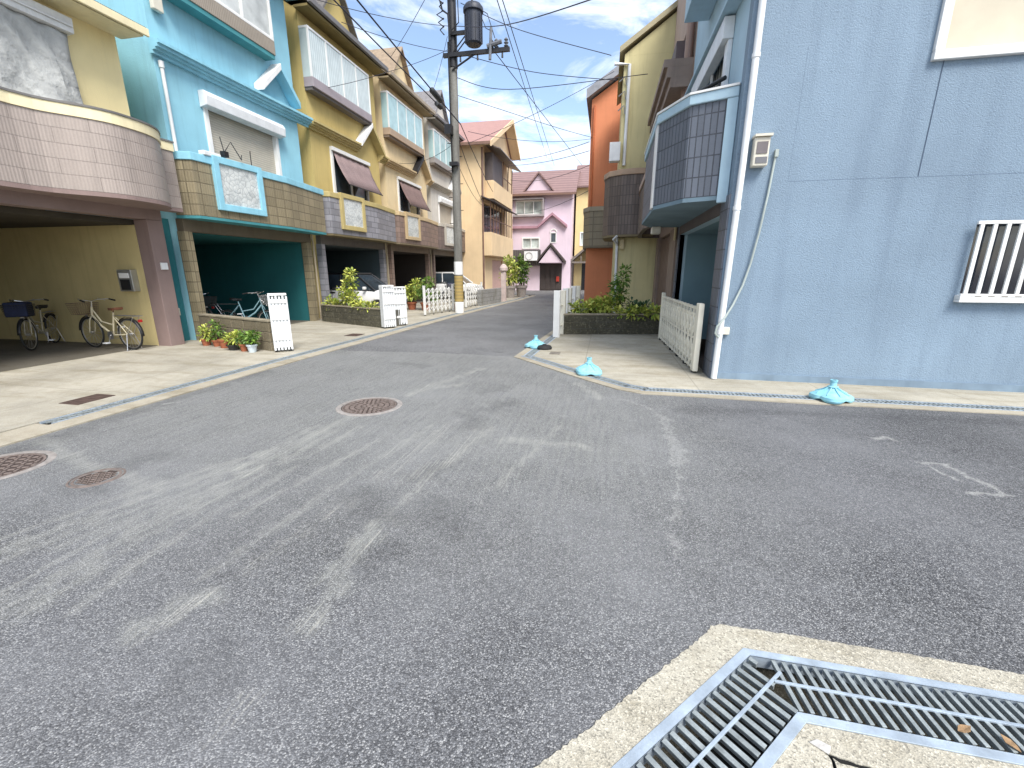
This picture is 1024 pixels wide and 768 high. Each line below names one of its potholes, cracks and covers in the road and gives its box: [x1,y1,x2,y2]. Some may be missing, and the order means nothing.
drain grate [611,648,806,768]
manhole cover [336,397,402,416]
manhole cover [0,450,57,480]
utility cover [59,394,116,405]
manhole cover [65,468,126,488]
drain grate [744,648,1024,766]
